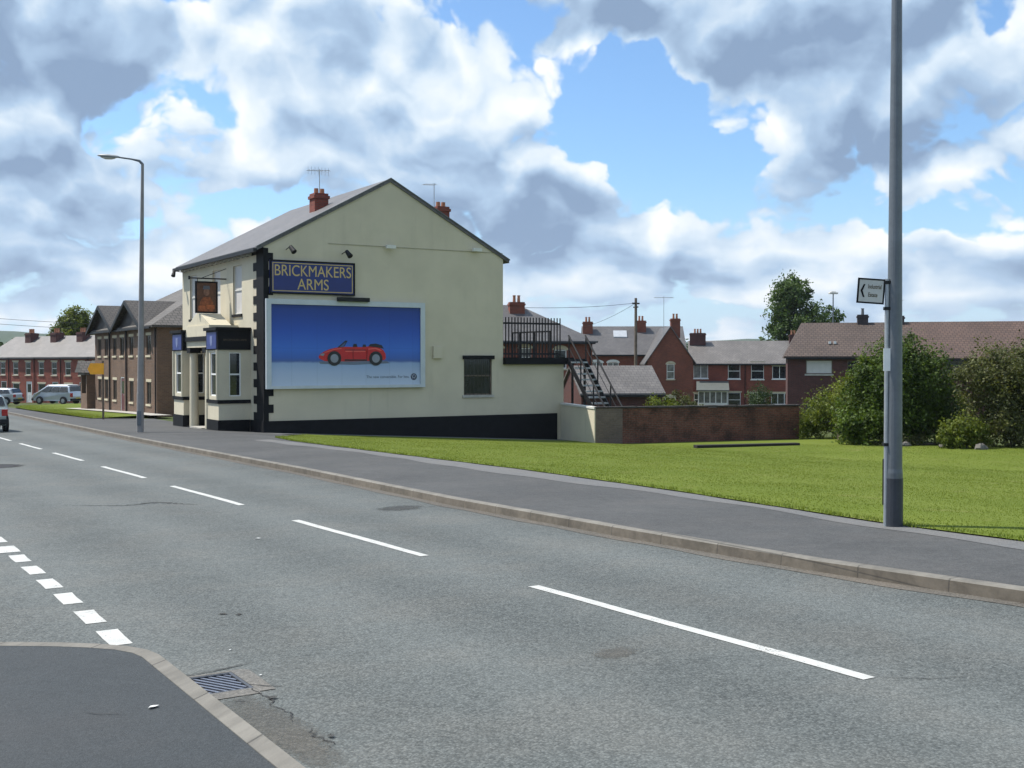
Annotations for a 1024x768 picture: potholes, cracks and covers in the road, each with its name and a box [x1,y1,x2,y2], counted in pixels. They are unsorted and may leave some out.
crack [251,684,335,747]
drain grate [190,672,253,694]
